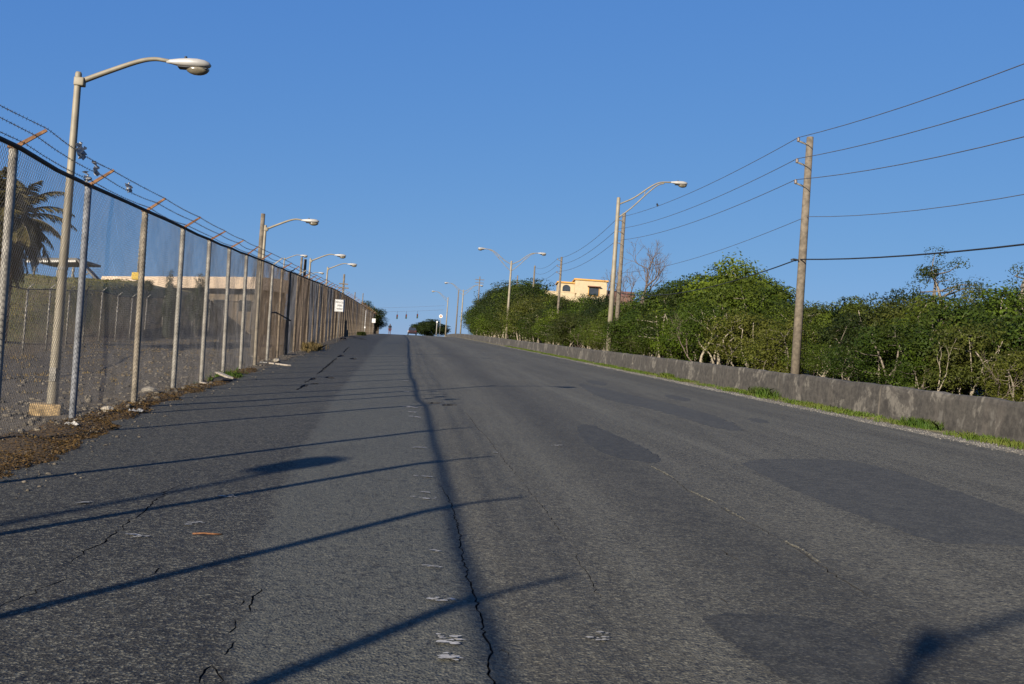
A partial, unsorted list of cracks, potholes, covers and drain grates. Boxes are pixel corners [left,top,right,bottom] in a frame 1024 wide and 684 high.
crack [0,487,175,607]
crack [648,465,873,598]
crack [296,347,350,390]
crack [199,589,263,683]
crack [442,487,509,684]
